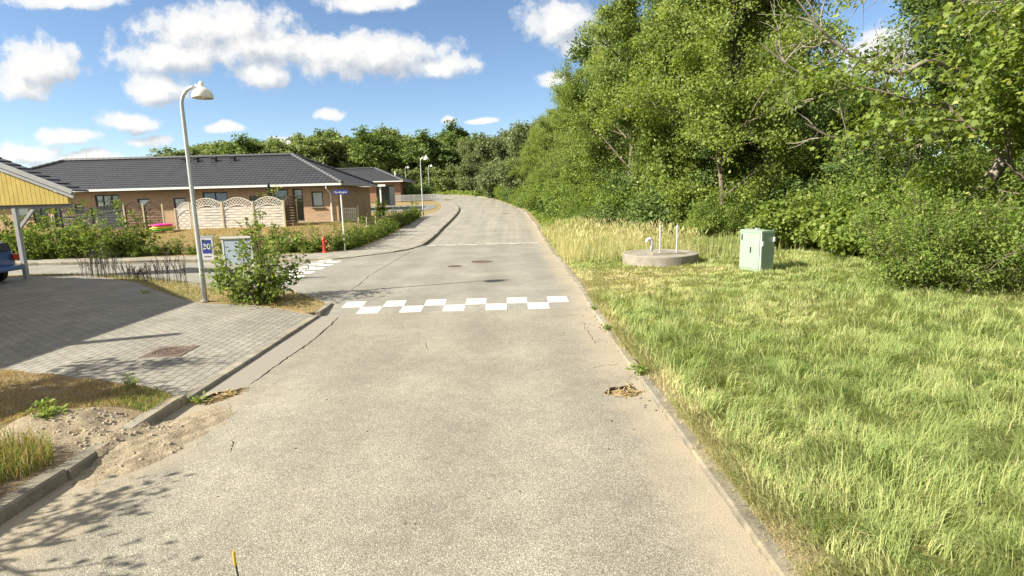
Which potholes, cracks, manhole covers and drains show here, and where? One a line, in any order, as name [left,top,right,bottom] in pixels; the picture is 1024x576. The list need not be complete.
crack [251,317,338,384]
manhole cover [139,345,200,358]
pothole [605,385,642,397]
